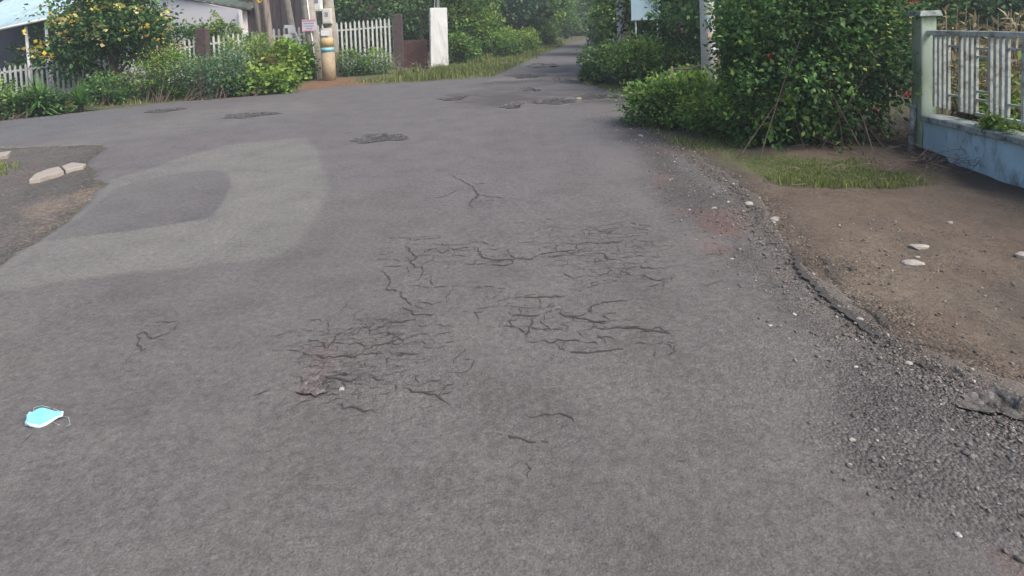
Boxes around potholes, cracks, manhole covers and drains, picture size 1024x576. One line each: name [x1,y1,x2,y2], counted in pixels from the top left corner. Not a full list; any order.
crack [124,321,178,369]
crack [272,219,681,412]
crack [436,169,501,207]
pothole [350,133,409,143]
pothole [512,98,575,106]
crack [499,413,574,443]
